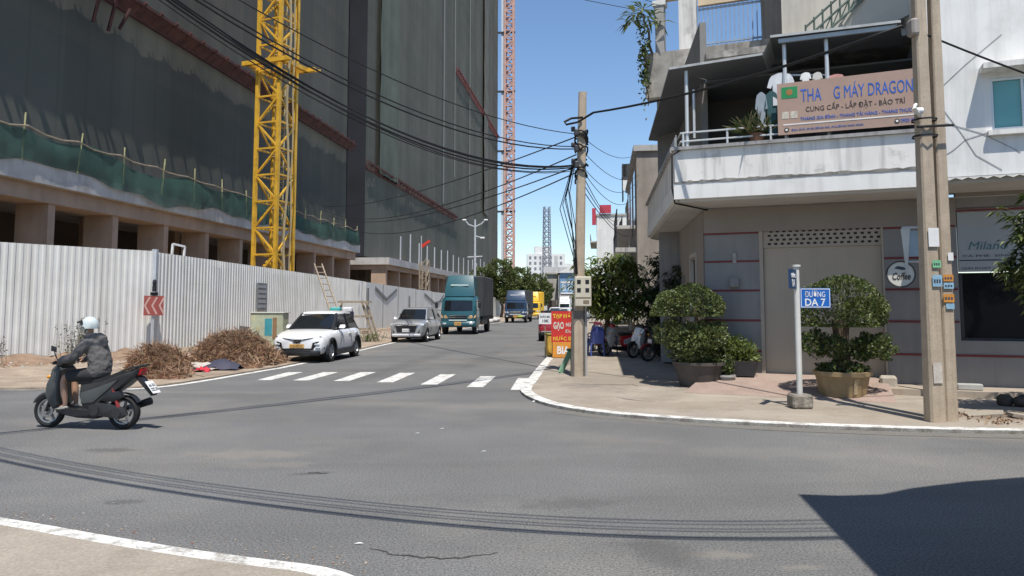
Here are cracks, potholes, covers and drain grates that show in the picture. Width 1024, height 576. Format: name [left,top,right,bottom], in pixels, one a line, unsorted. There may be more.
crack [370,548,498,559]
